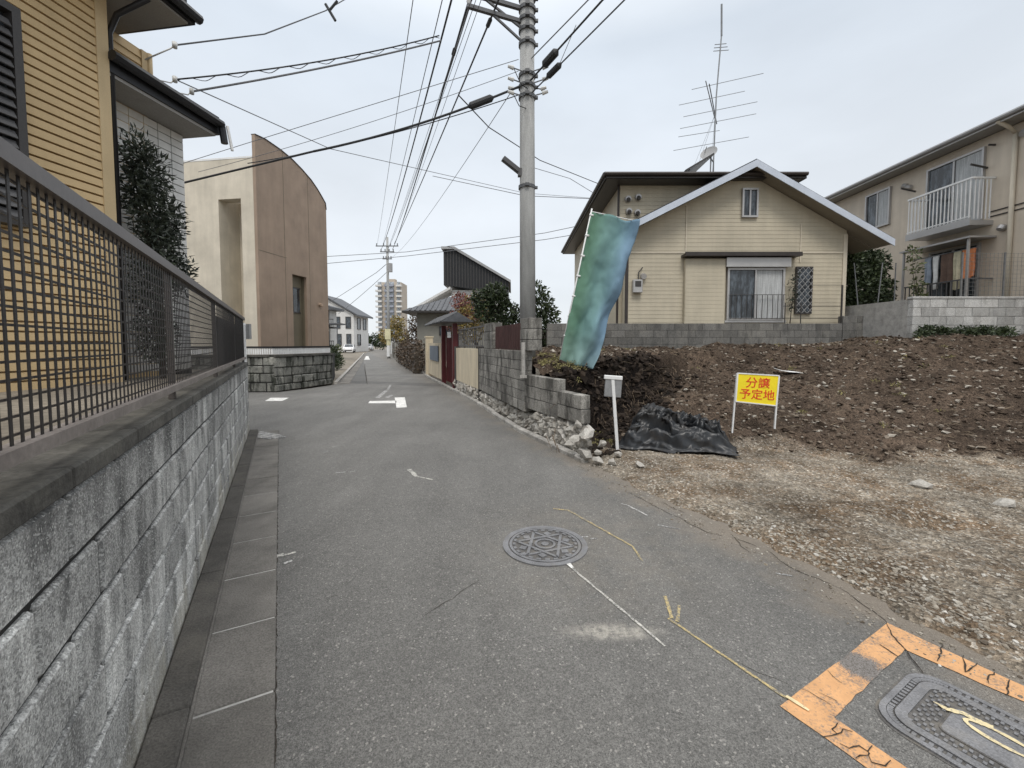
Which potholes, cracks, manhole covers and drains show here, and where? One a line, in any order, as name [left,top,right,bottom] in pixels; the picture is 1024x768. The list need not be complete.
crack [962,655,1010,695]
crack [731,534,943,673]
manhole cover [875,673,1024,768]
manhole cover [503,526,588,567]
crack [822,723,891,766]
